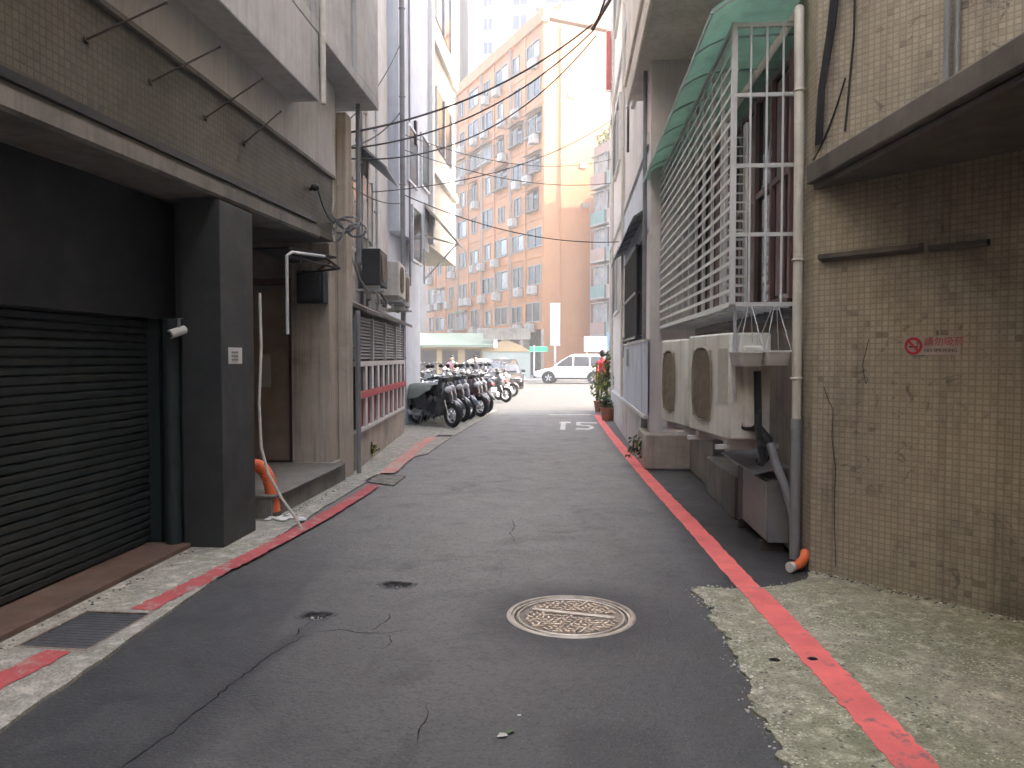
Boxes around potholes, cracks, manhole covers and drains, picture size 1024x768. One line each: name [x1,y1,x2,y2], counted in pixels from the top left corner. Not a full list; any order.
crack [122,612,407,768]
pothole [295,611,340,622]
pothole [375,581,418,590]
manhole cover [507,595,636,639]
